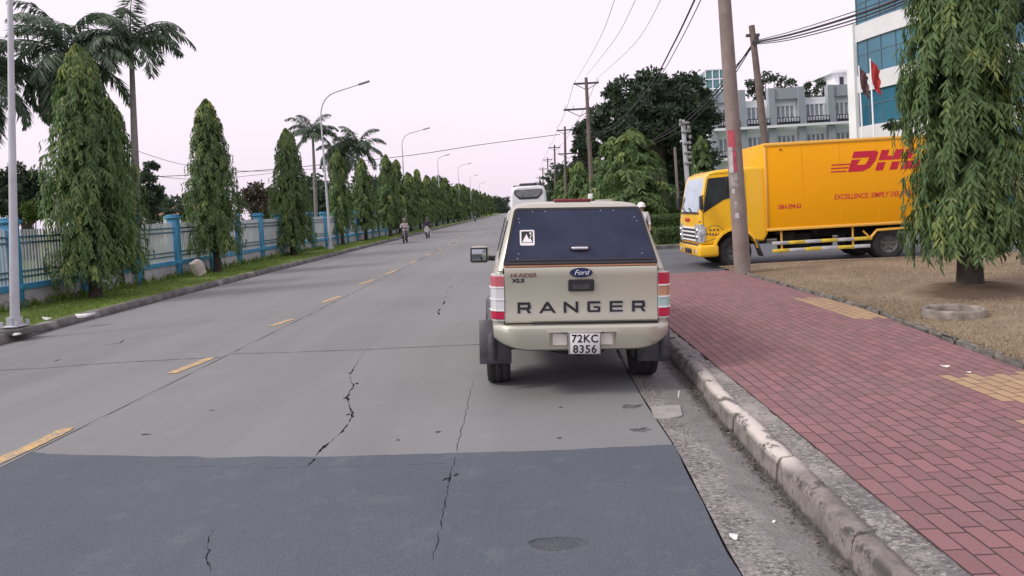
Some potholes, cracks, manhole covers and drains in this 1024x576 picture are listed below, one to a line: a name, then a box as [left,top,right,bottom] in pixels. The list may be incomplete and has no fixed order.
crack [205,530,213,571]
crack [177,352,473,557]
